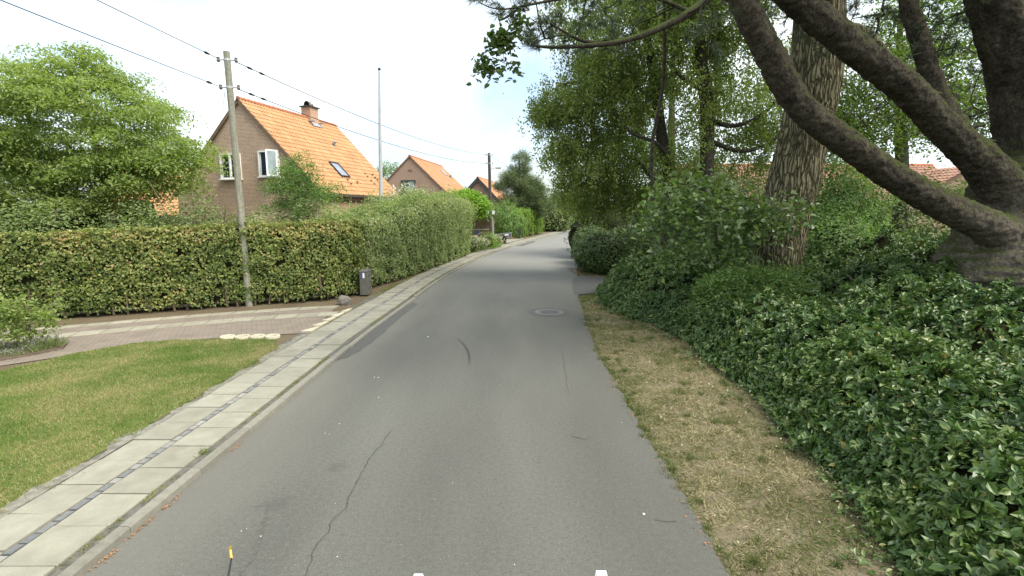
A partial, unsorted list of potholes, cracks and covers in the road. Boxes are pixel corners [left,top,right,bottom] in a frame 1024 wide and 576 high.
crack [305,429,392,576]
manhole cover [527,308,573,317]
